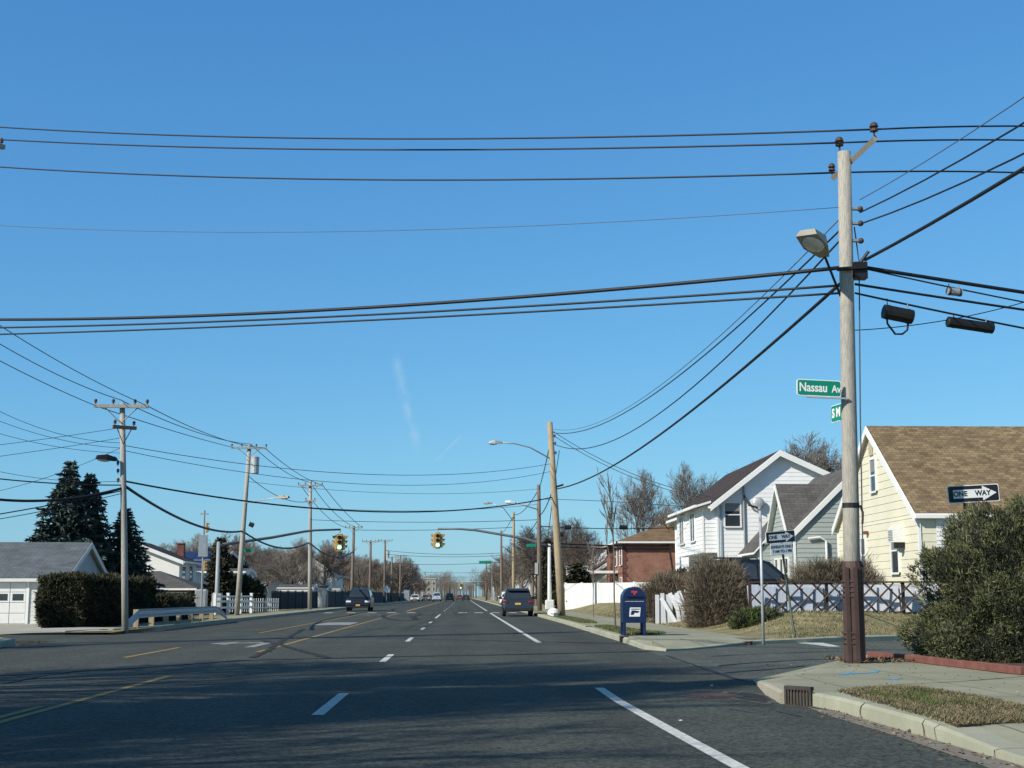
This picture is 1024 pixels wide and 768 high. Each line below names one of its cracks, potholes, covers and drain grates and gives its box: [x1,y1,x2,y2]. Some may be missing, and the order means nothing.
drain grate [784,685,814,706]
